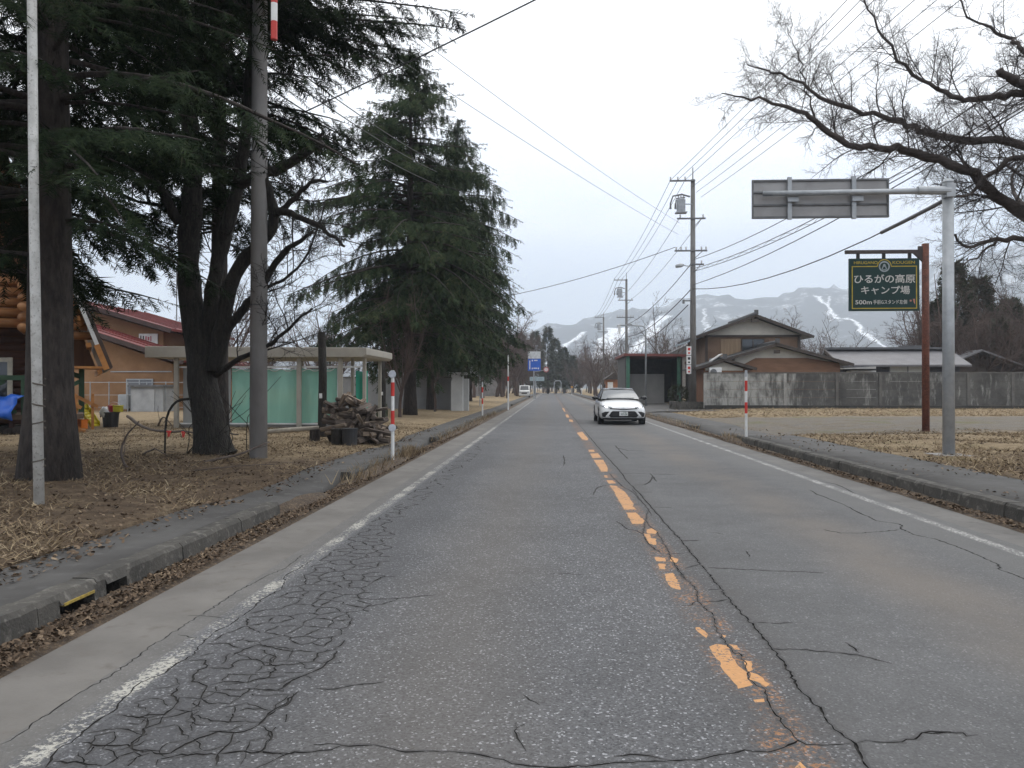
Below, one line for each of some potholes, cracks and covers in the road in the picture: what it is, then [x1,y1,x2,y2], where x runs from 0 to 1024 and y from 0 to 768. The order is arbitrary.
crack [810,482,1024,579]
crack [44,442,853,768]
